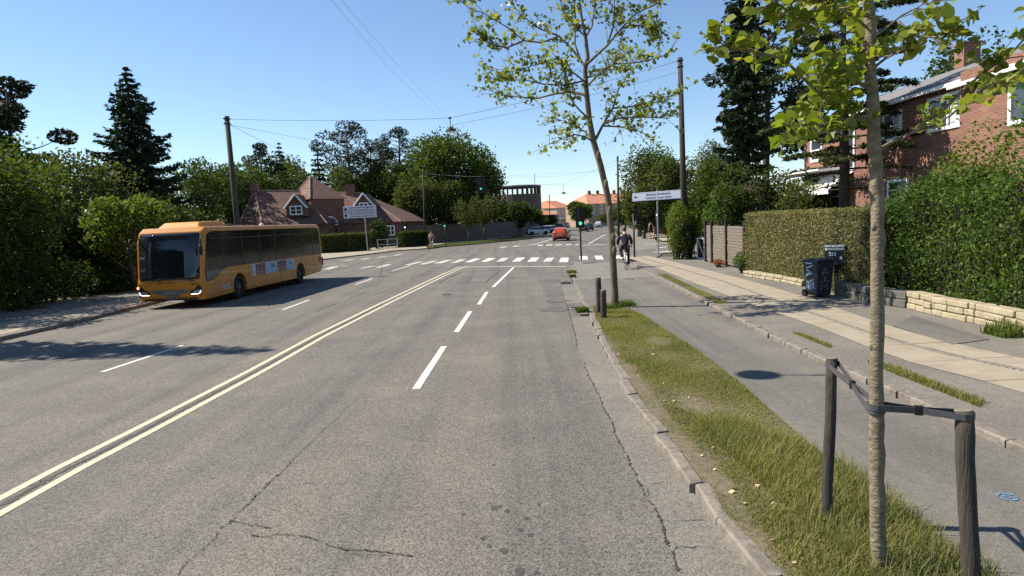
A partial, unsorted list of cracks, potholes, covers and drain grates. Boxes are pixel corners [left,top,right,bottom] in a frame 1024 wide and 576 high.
crack [561,288,705,573]
crack [176,398,413,575]
